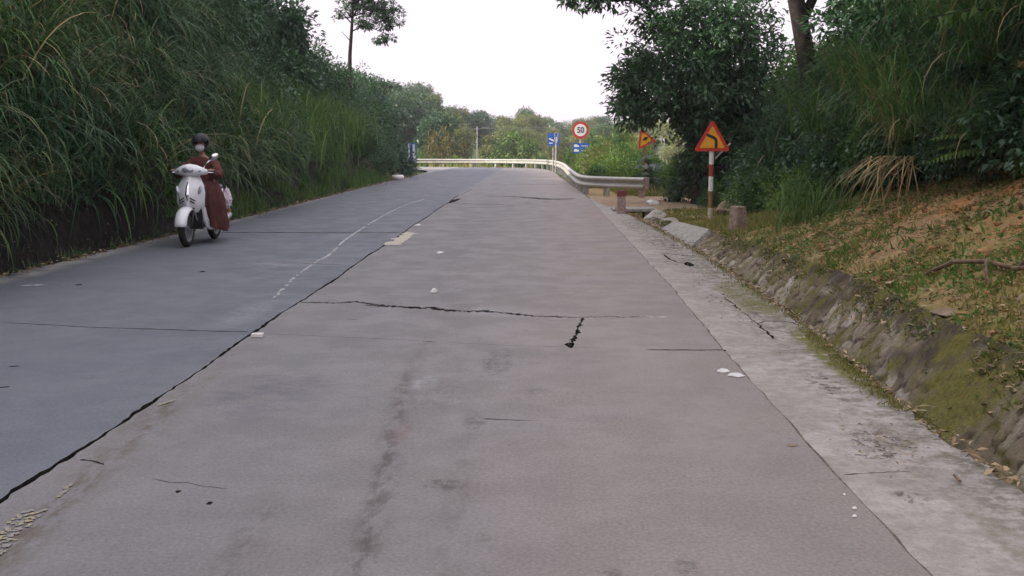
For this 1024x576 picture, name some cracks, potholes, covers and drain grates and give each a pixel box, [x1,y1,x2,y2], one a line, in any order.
crack [725,299,795,339]
crack [155,479,227,489]
crack [301,301,634,347]
